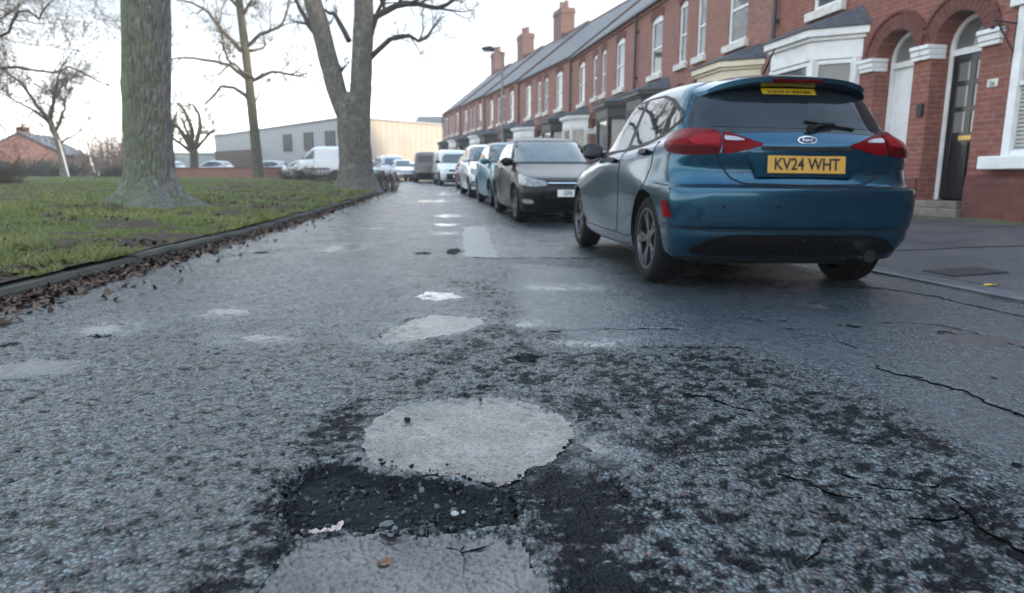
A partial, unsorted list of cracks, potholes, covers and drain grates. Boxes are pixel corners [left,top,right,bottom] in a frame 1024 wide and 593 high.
pothole [511,352,542,361]
crack [837,340,1024,417]
crack [680,393,755,412]
crack [777,473,1024,555]
crack [550,328,751,349]
crack [807,538,827,561]
manhole cover [922,266,1009,280]
pothole [264,461,525,539]
